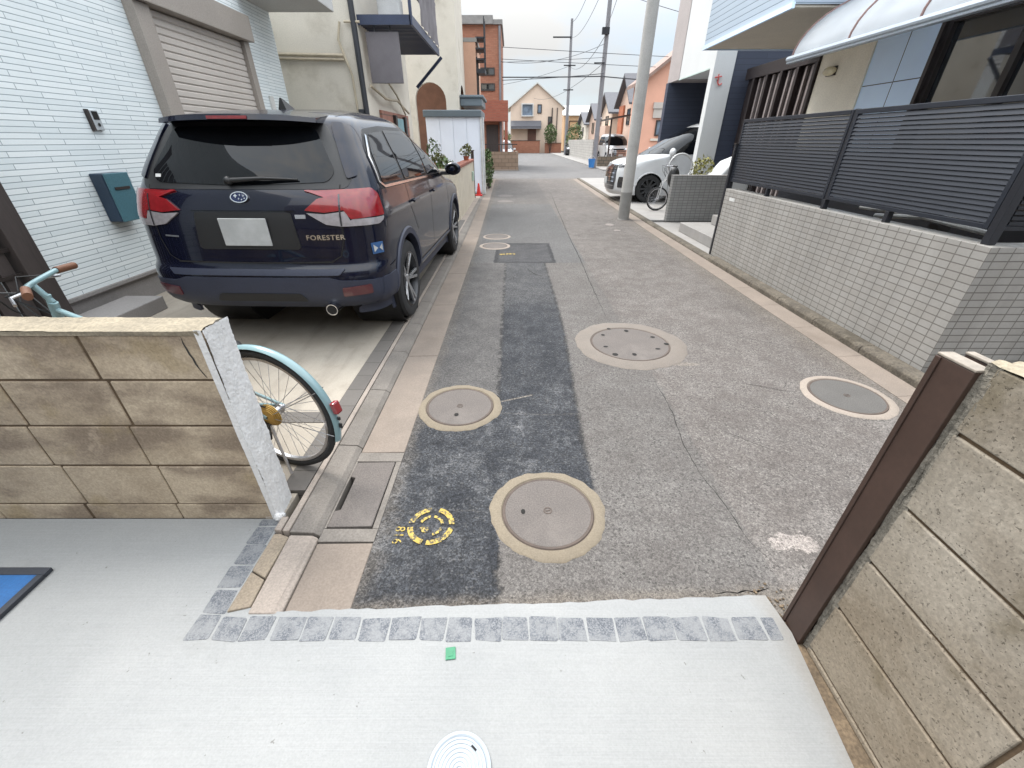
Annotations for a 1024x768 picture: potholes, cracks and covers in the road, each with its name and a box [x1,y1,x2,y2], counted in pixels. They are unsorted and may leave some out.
manhole cover [800,376,900,420]
manhole cover [489,472,605,564]
crack [659,389,775,564]
manhole cover [418,385,502,432]
manhole cover [575,323,688,370]
